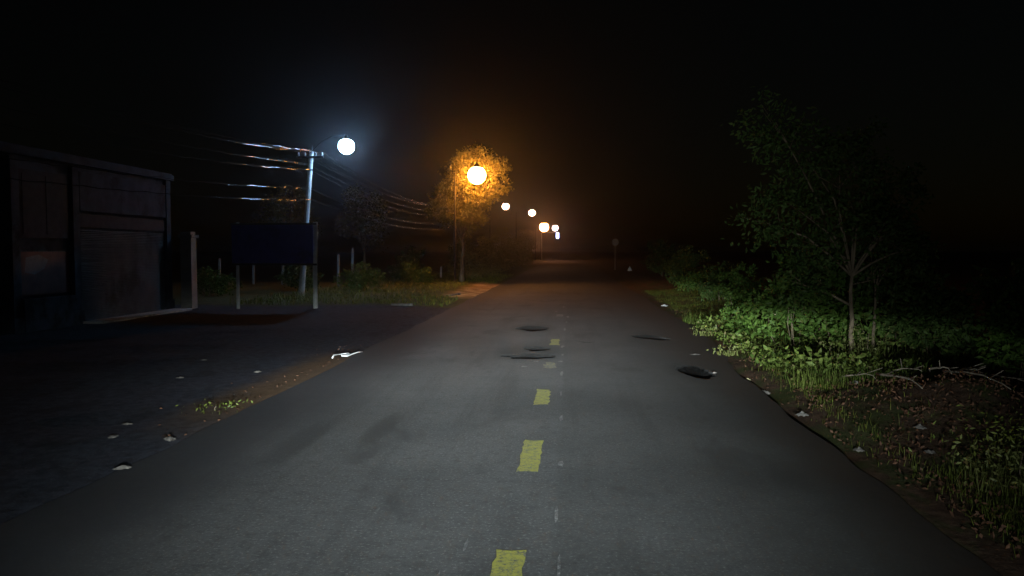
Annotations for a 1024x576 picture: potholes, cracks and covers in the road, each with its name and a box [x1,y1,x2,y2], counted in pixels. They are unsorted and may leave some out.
pothole [674,364,717,379]
